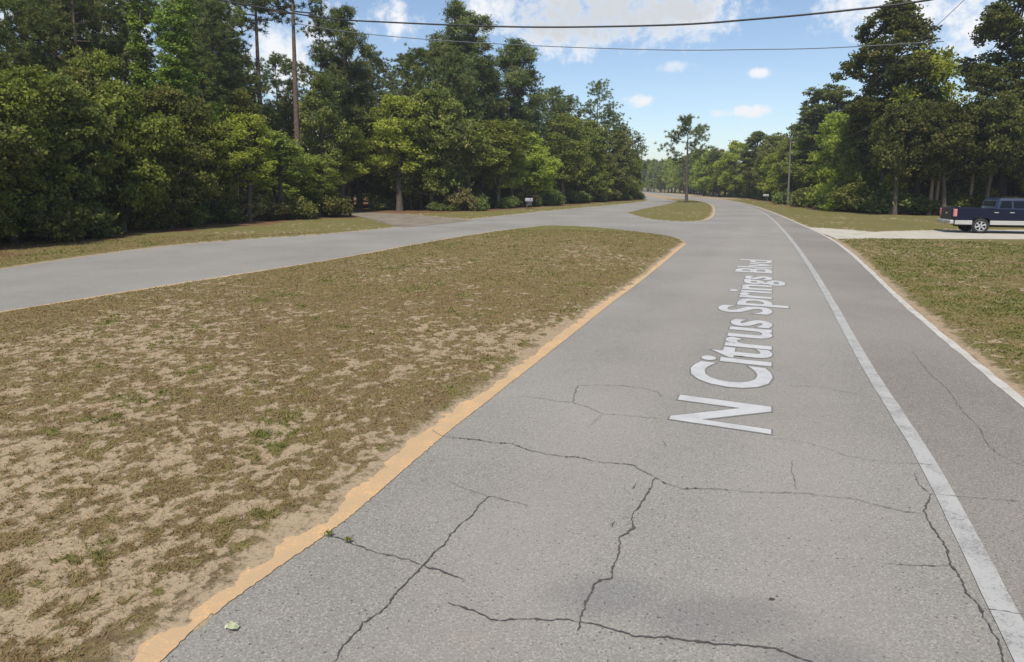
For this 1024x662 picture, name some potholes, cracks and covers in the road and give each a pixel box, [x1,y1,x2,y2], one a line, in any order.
crack [330,482,523,662]
crack [797,440,1022,662]
crack [432,430,926,662]
